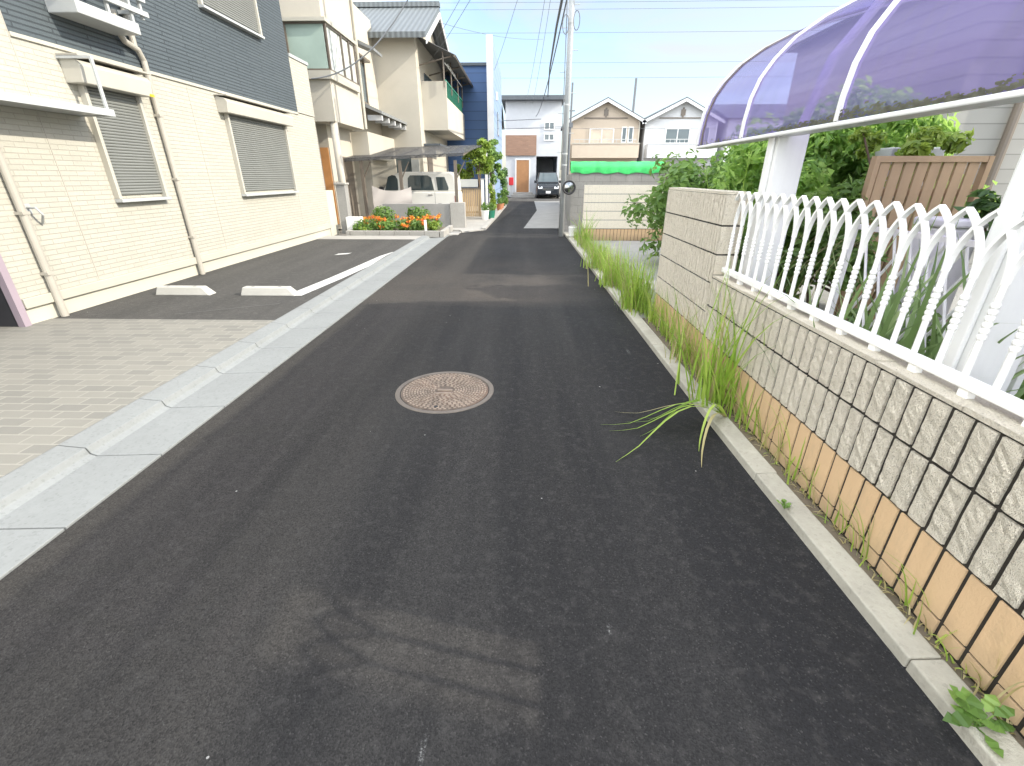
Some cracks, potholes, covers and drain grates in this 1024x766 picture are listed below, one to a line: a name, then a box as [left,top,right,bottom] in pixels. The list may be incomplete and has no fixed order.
manhole cover [395,371,494,414]
